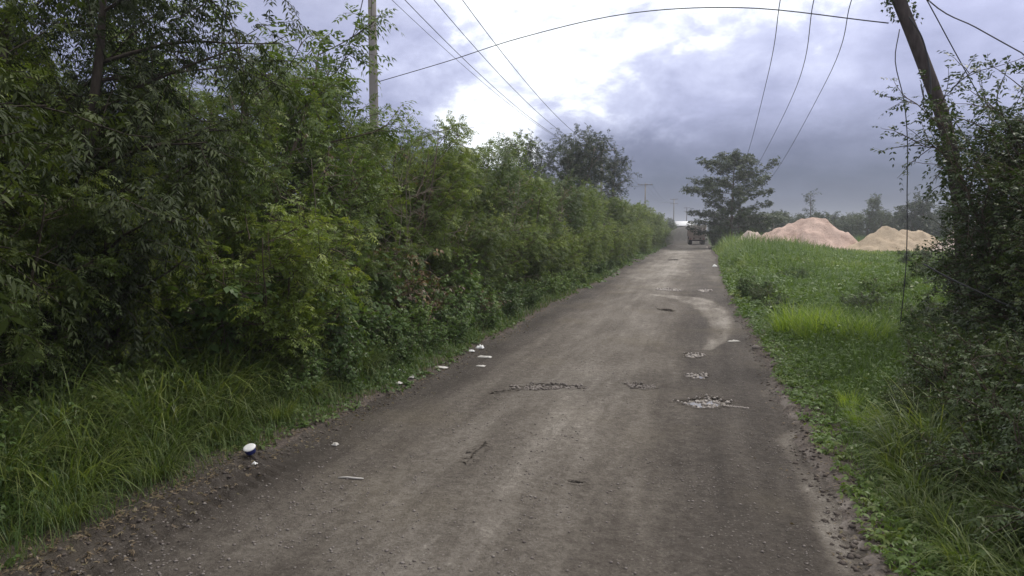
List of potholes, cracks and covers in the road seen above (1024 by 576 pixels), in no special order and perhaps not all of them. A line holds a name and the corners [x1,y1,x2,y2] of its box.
crack [458,441,492,465]
pothole [509,381,587,391]
pothole [669,394,749,409]
